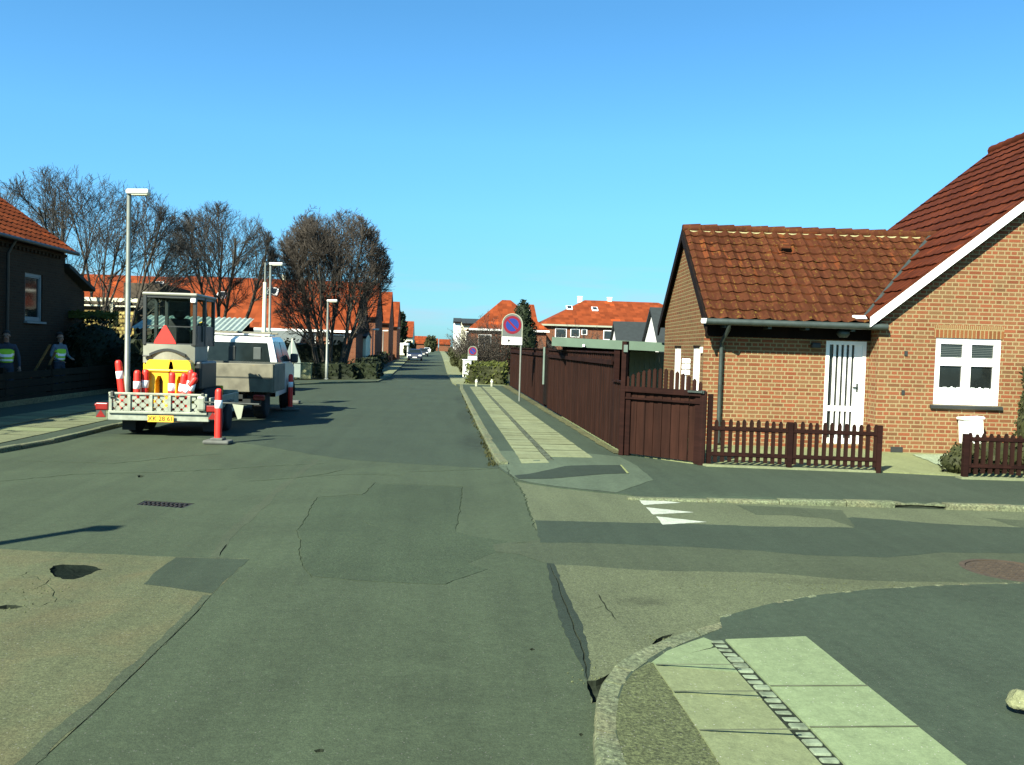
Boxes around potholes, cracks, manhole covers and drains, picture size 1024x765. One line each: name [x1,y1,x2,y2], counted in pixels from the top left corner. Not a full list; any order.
manhole cover [959,559,1024,582]
crack [551,568,615,679]
crack [7,454,535,584]
pothole [50,564,102,579]
crack [17,571,59,605]
